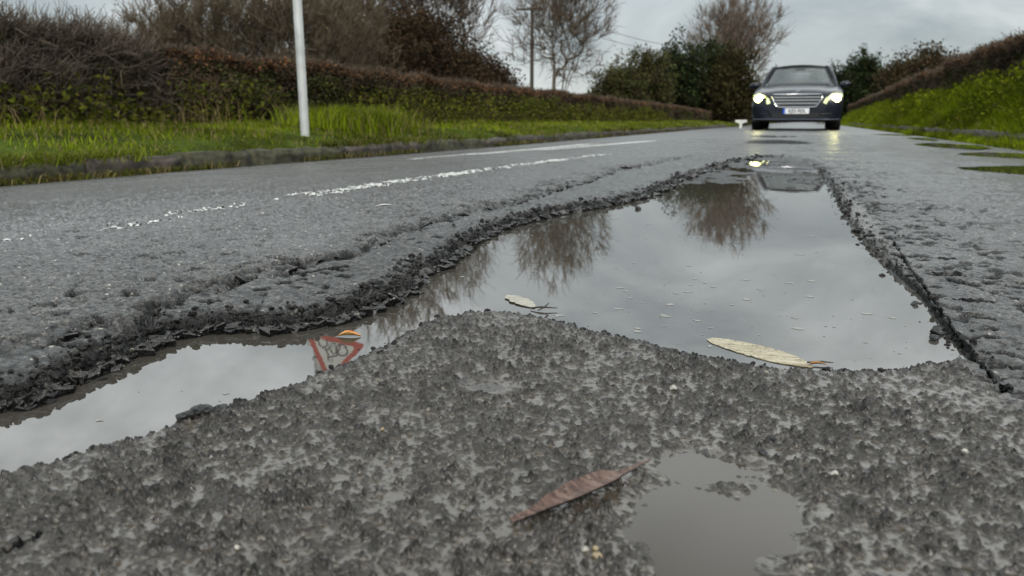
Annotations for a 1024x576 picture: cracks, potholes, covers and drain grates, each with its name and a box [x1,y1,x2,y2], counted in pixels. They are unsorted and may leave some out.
pothole [0,154,972,483]
